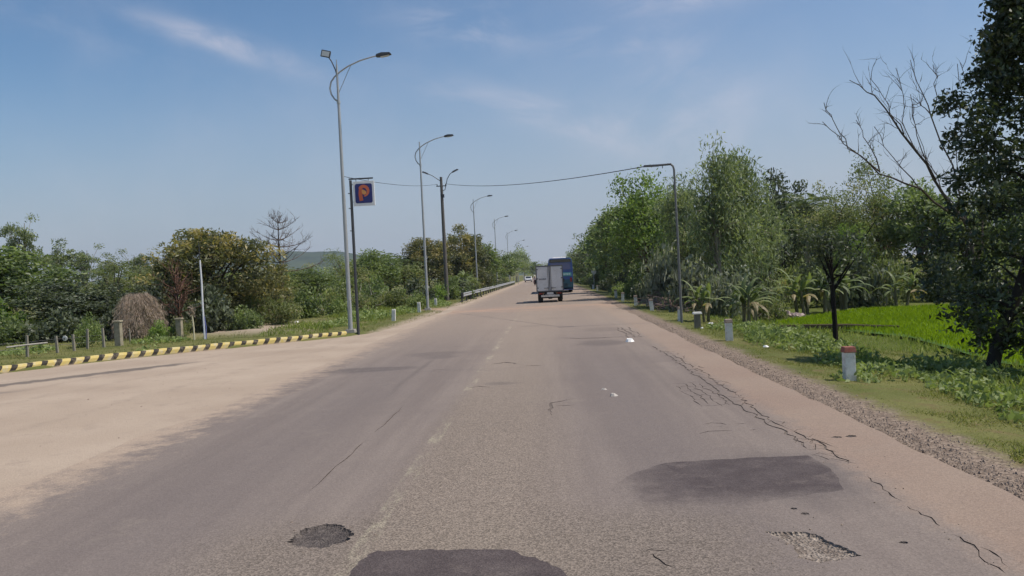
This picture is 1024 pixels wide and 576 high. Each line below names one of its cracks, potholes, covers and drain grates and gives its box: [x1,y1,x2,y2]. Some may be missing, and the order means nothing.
crack [652,346,852,463]
crack [867,476,1004,572]
pothole [766,531,861,563]
